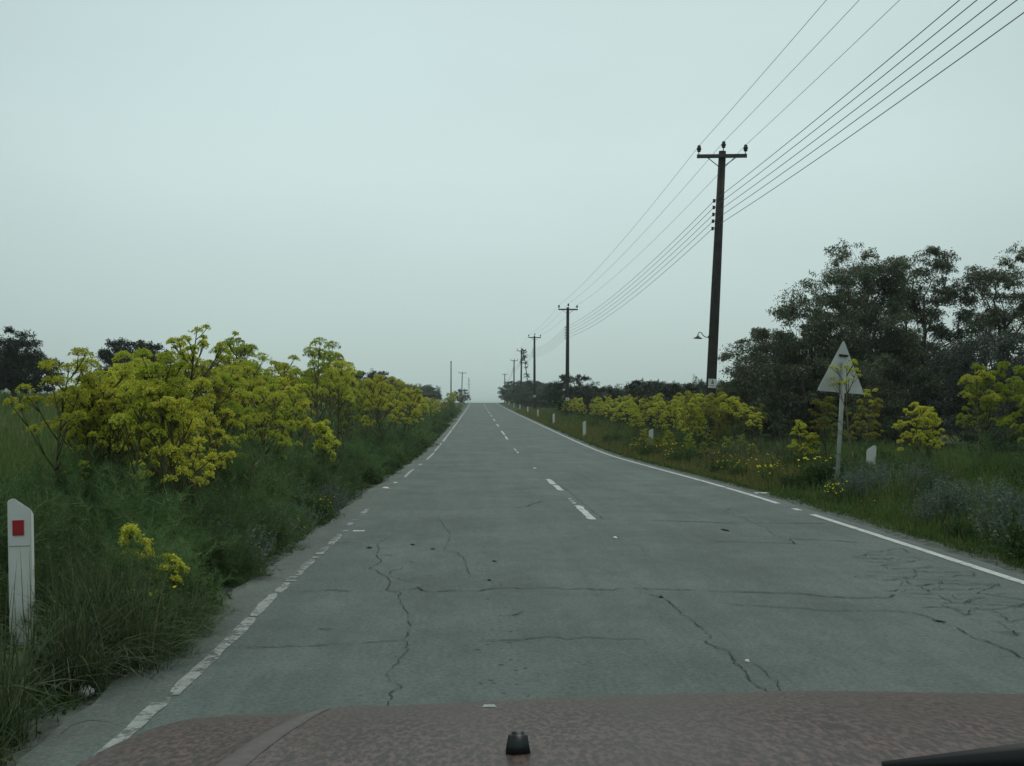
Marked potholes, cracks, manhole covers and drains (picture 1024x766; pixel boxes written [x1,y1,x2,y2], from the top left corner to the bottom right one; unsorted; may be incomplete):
crack [231,508,1024,706]
